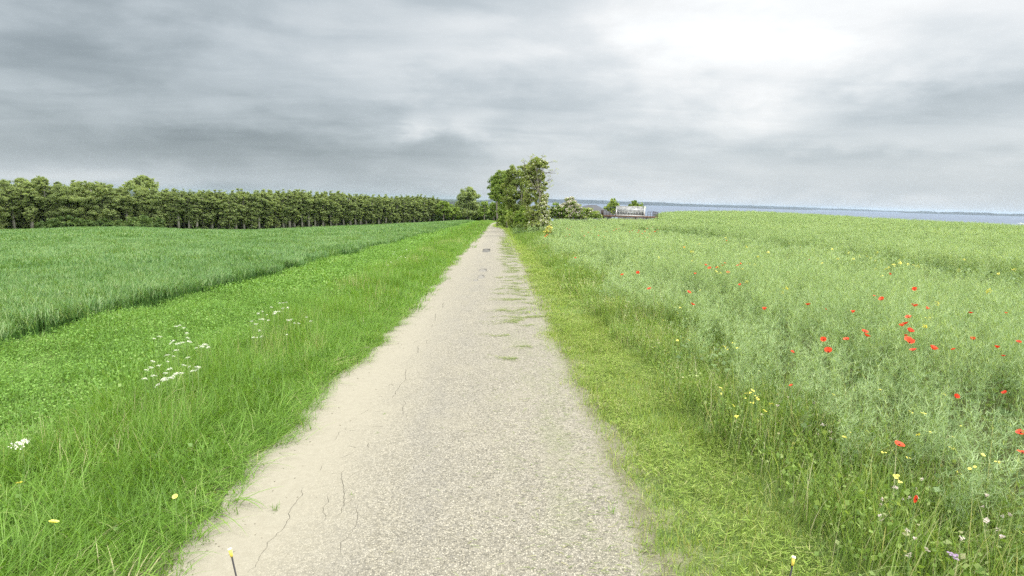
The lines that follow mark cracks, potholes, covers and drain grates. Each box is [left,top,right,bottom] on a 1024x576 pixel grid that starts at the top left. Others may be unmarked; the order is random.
crack [254,347,419,568]
